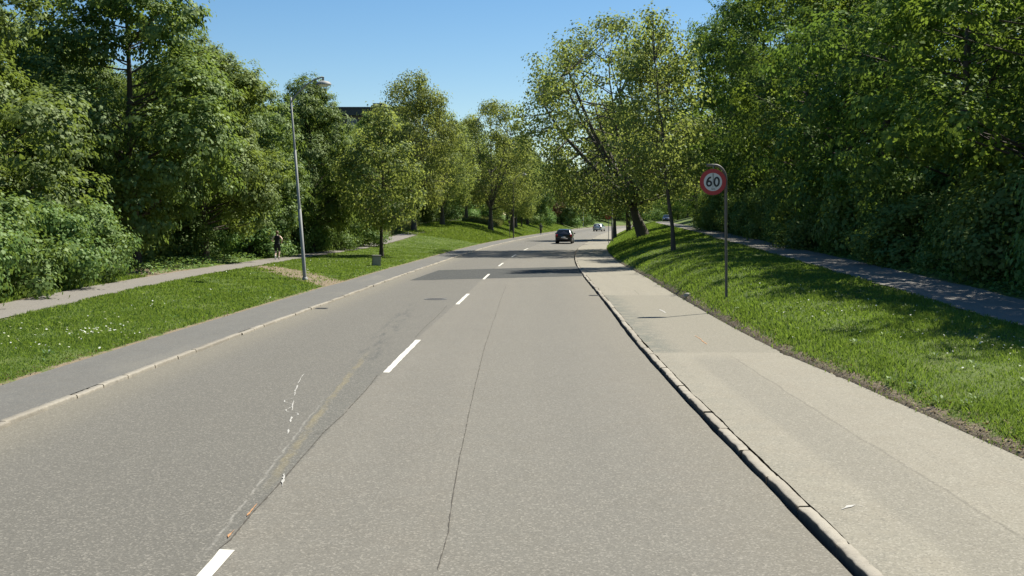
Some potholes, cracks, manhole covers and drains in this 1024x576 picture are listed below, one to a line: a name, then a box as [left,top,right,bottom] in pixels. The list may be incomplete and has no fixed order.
crack [437,287,506,570]
